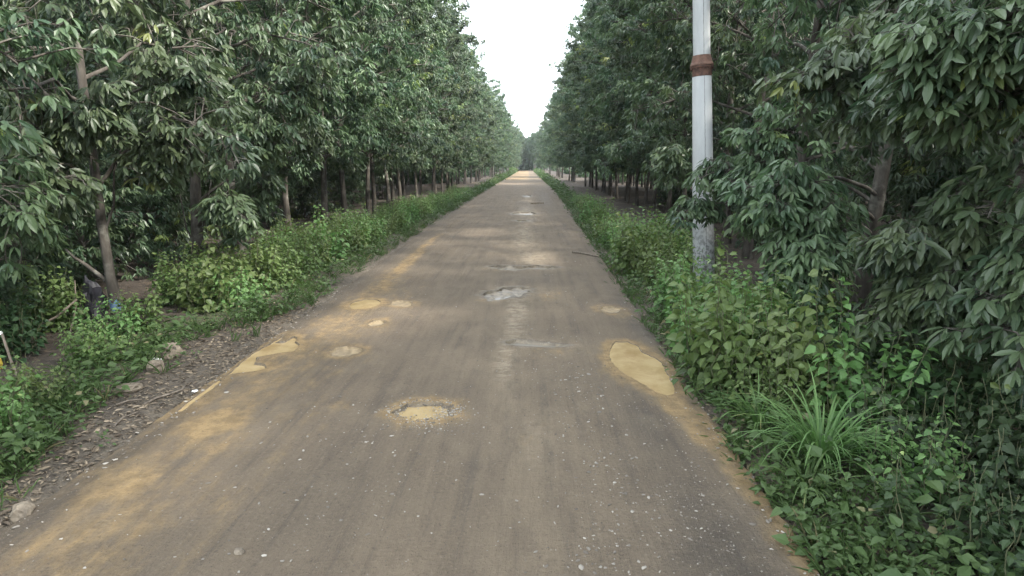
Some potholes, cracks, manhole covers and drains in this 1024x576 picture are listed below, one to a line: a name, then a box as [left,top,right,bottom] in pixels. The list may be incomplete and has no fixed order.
pothole [391,401,452,421]
pothole [482,286,532,301]
pothole [505,339,570,347]
